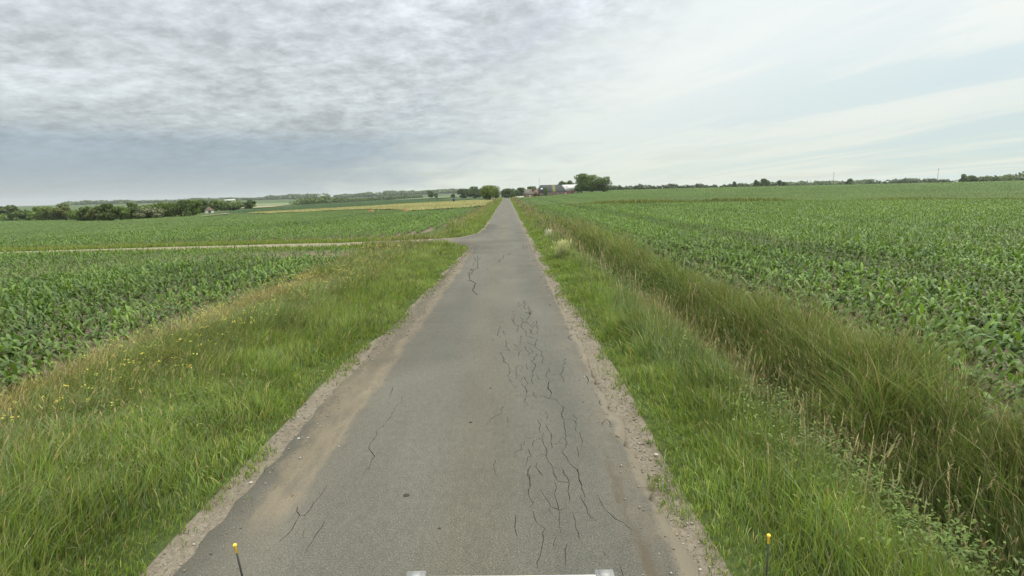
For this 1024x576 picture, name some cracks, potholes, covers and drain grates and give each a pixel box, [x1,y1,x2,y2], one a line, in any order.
crack [486,303,630,567]
